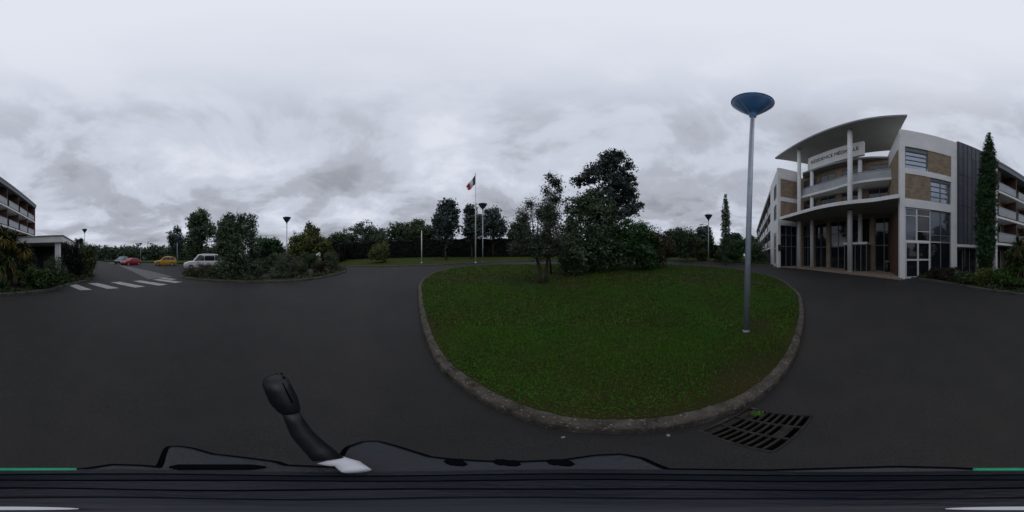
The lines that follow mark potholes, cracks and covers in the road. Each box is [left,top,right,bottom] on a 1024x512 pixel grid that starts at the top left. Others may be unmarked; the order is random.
drain grate [699,407,814,453]
